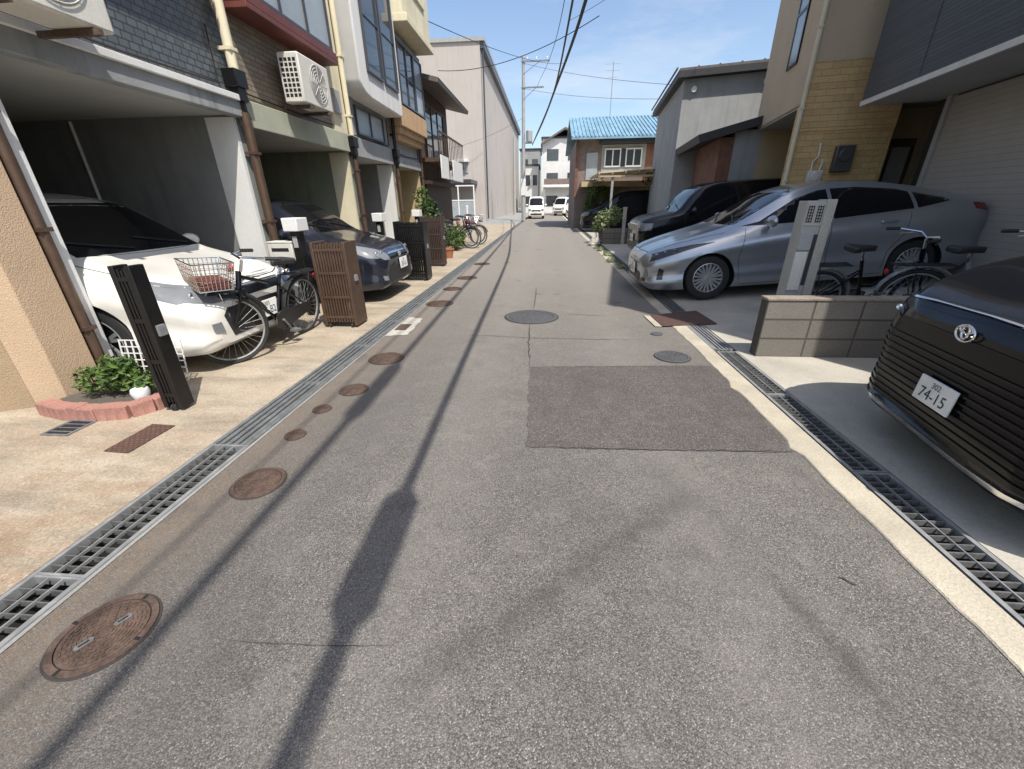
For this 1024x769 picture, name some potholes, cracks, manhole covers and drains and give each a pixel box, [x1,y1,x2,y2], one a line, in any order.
manhole cover [339,384,369,396]
manhole cover [228,467,288,500]
manhole cover [284,429,307,441]
manhole cover [368,352,404,365]
drain grate [764,394,889,473]
manhole cover [504,310,559,324]
drain grate [716,351,790,395]
manhole cover [654,350,691,363]
manhole cover [40,593,163,682]
manhole cover [312,404,332,414]
drain grate [851,471,1024,628]
